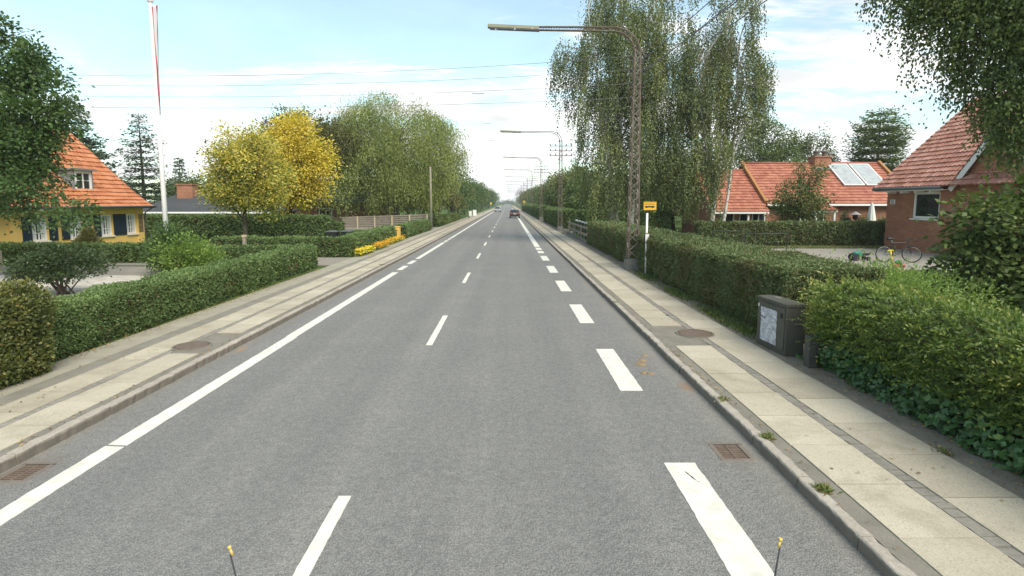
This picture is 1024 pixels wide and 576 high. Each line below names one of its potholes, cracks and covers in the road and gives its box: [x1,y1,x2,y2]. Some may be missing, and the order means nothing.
manhole cover [675,329,715,339]
manhole cover [171,341,213,352]
drain grate [708,443,757,461]
drain grate [0,462,58,483]
